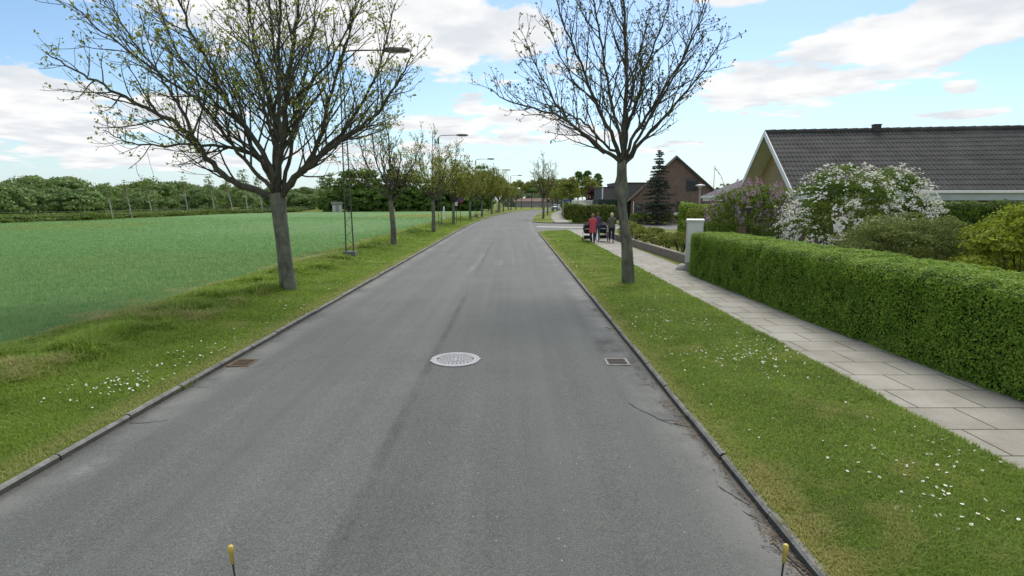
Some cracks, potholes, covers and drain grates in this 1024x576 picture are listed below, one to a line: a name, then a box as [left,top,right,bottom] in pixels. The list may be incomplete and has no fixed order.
manhole cover [430,352,481,367]
drain grate [226,359,259,367]
drain grate [604,358,631,366]
